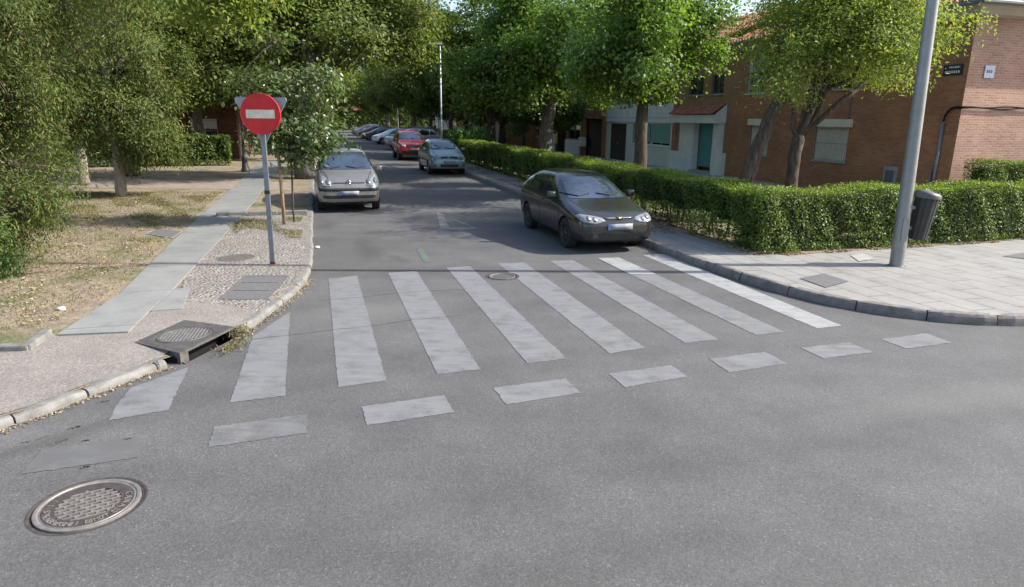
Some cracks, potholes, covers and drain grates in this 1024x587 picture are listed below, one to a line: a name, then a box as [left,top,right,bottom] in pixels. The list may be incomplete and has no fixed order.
drain grate [135,320,235,364]
utility cover [801,273,847,287]
utility cover [851,253,875,261]
utility cover [146,228,182,238]
utility cover [219,275,289,299]
manhole cover [24,477,148,536]
